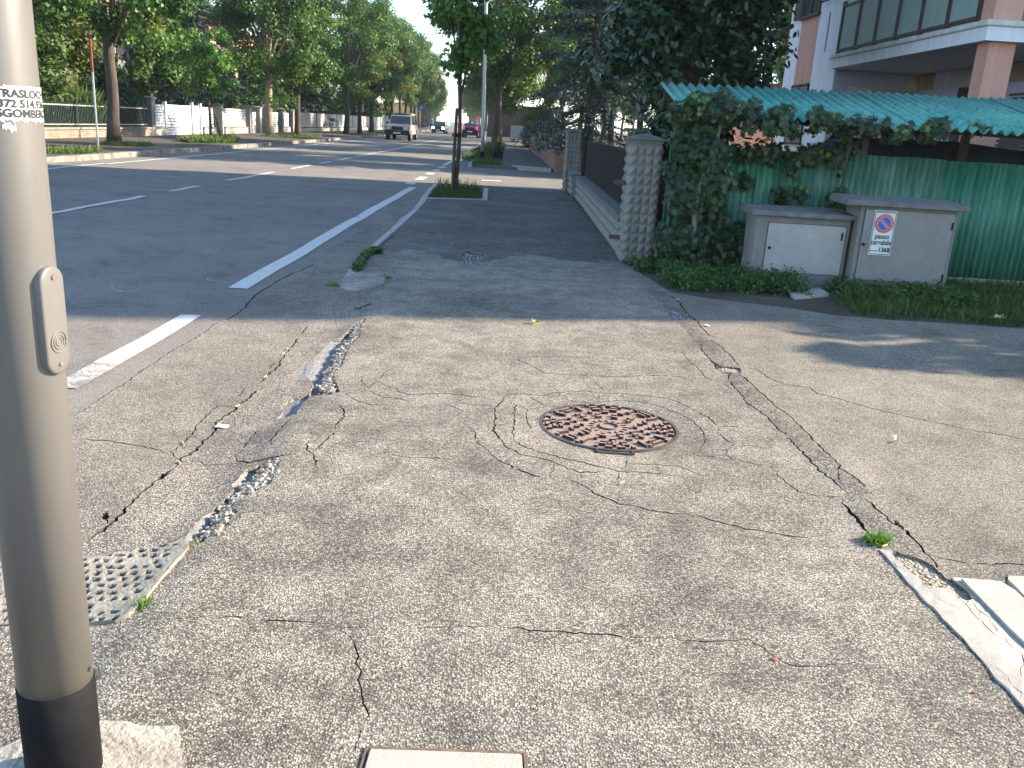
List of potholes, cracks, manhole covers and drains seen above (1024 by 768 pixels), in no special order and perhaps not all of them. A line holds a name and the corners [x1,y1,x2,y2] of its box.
pothole [289,318,370,396]
utility cover [359,746,528,768]
crack [80,296,1024,569]
pothole [458,251,488,265]
pothole [184,457,281,544]
manhole cover [539,404,679,456]
pothole [277,395,309,419]
